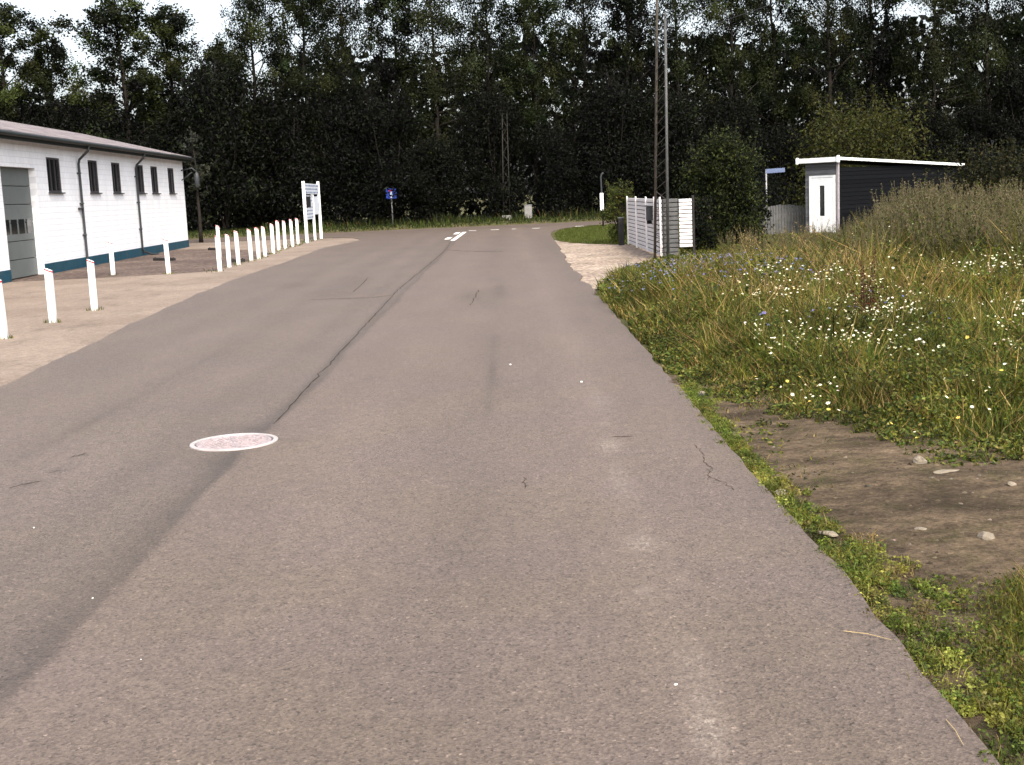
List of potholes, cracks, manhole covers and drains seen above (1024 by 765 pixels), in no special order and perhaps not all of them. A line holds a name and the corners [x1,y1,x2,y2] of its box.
crack [276,243,492,422]
manhole cover [189,433,278,451]
